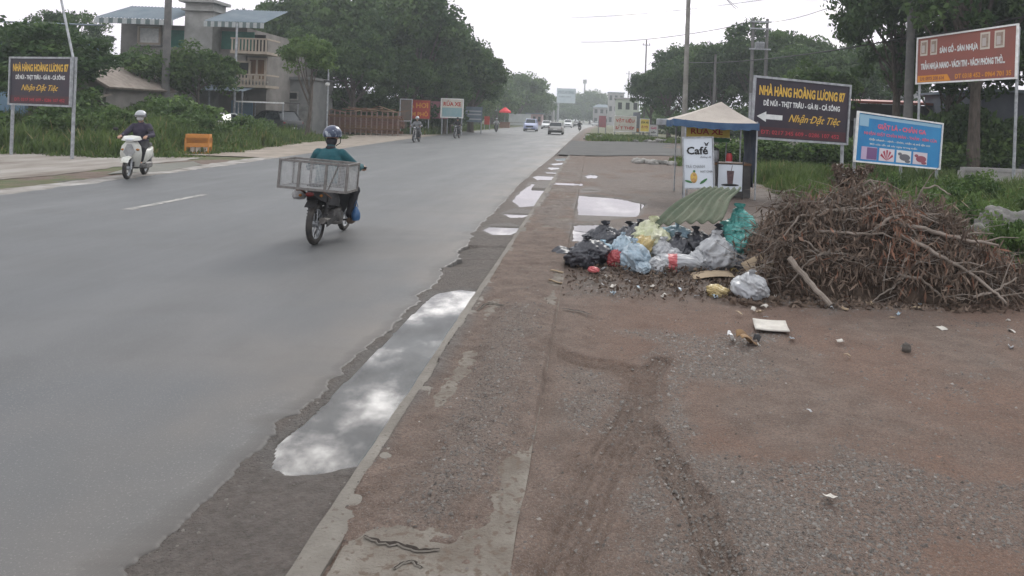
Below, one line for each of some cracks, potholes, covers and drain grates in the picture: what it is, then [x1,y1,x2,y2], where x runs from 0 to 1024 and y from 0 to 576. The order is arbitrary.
crack [363,535,440,570]
